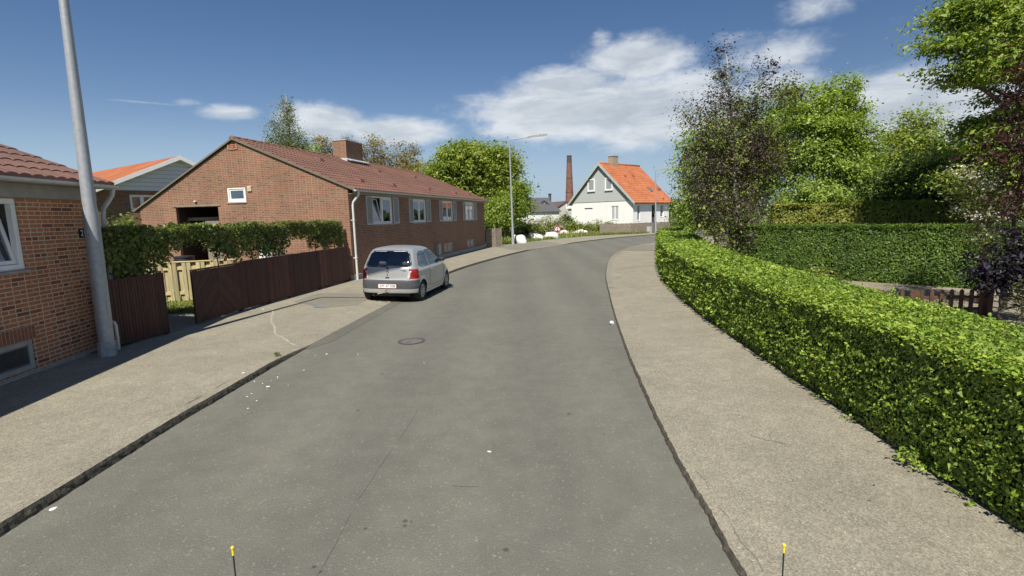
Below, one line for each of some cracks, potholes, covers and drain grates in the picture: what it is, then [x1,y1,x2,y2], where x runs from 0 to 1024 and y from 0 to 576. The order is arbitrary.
crack [251,307,298,346]
